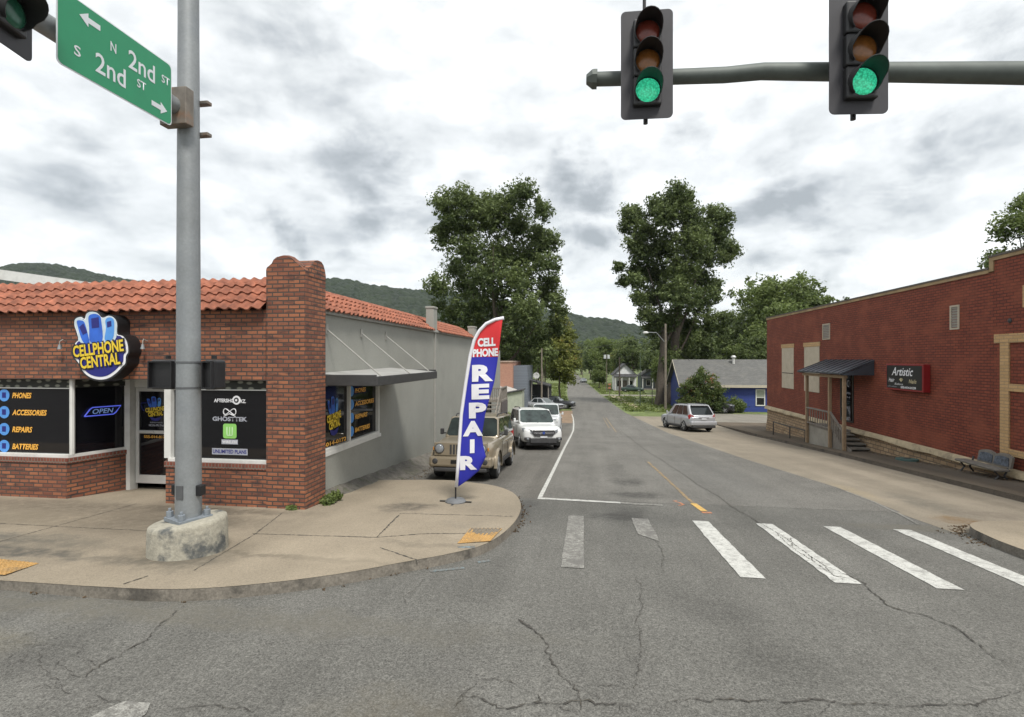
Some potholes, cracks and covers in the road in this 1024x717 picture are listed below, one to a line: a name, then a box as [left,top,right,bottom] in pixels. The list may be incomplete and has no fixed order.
crack [668,691,1021,714]
crack [5,602,190,709]
crack [446,619,635,715]
